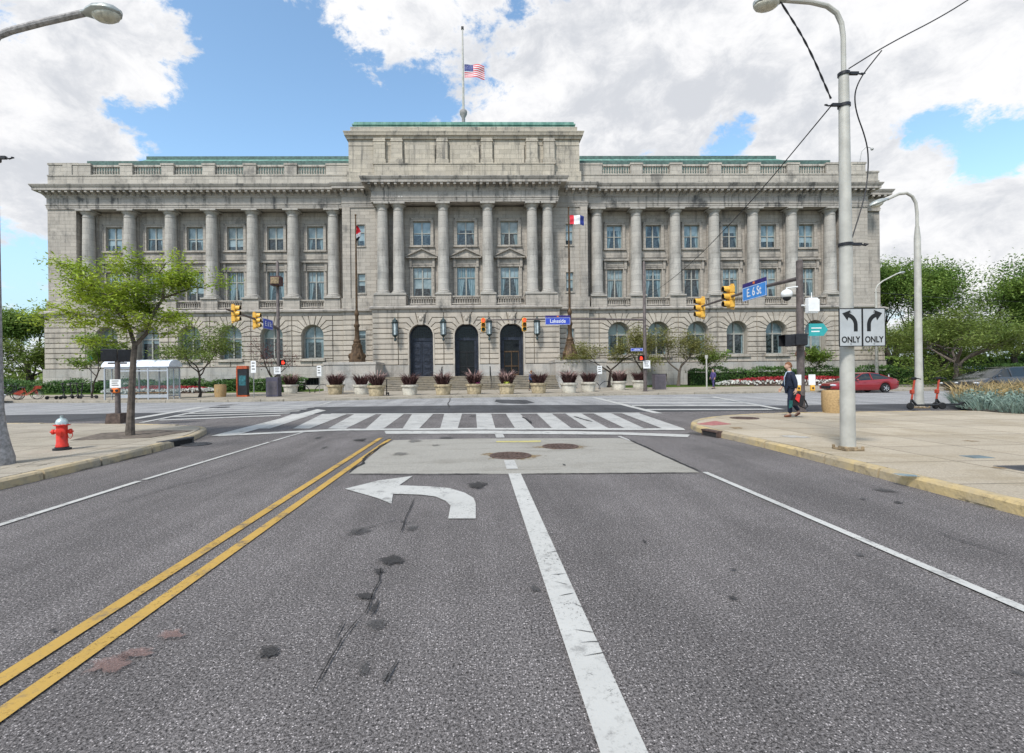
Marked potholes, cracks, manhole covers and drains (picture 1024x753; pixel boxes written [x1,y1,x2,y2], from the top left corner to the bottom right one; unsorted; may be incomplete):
pothole [375,554,405,565]
crack [311,573,381,693]
drain grate [158,436,194,446]
crack [354,499,414,535]
pothole [258,645,278,657]
